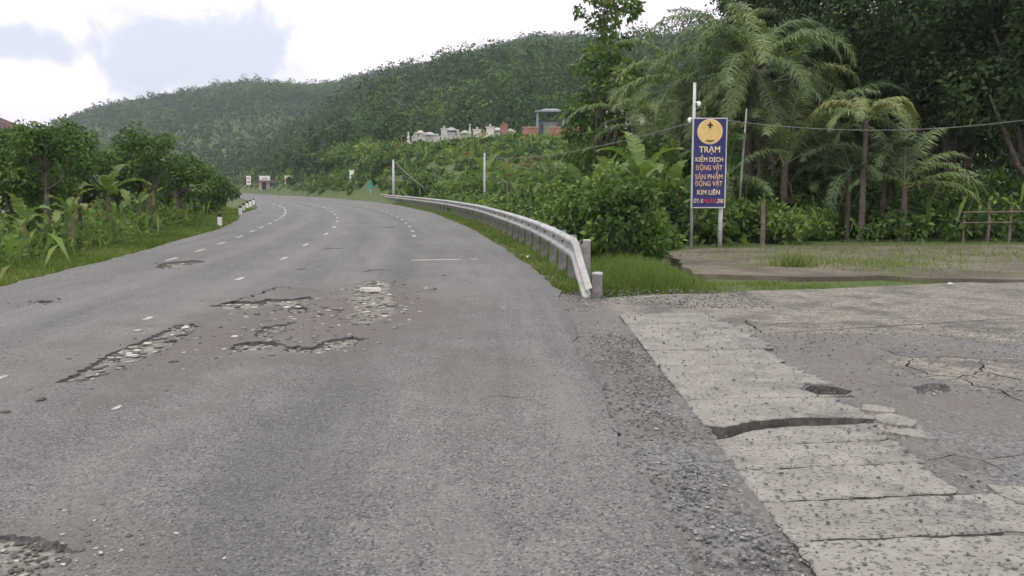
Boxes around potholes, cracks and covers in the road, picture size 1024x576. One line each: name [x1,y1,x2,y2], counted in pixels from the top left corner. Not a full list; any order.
crack [745,318,1017,334]
crack [879,348,1023,402]
pothole [0,534,76,576]
pothole [218,296,313,314]
pothole [154,260,205,269]
pothole [804,385,852,395]
pothole [57,323,199,383]
pothole [345,280,397,323]
pothole [912,383,951,395]
